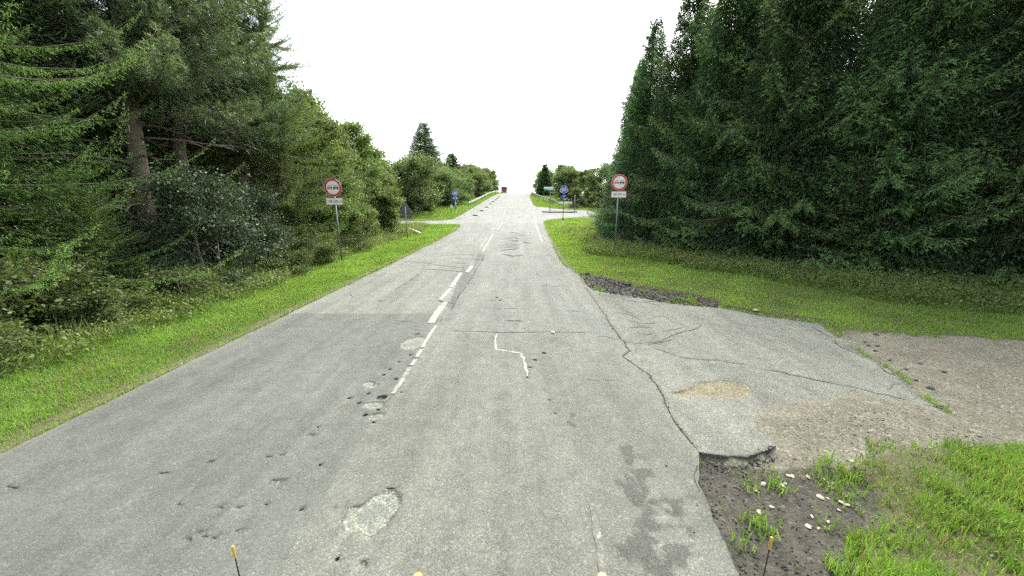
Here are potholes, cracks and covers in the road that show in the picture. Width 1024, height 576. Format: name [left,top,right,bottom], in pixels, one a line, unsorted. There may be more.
crack [458,289,743,491]
crack [762,364,942,410]
crack [500,232,532,257]
